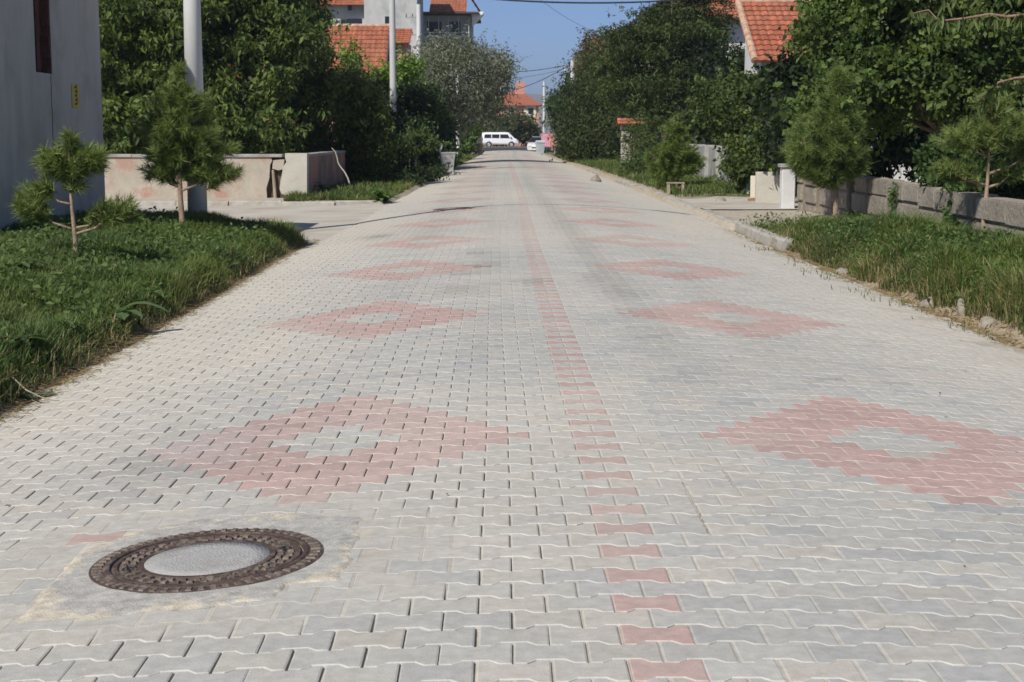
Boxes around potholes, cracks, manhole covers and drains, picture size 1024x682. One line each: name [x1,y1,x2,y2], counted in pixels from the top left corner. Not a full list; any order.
manhole cover [89,528,324,594]
crack [682,470,738,533]
